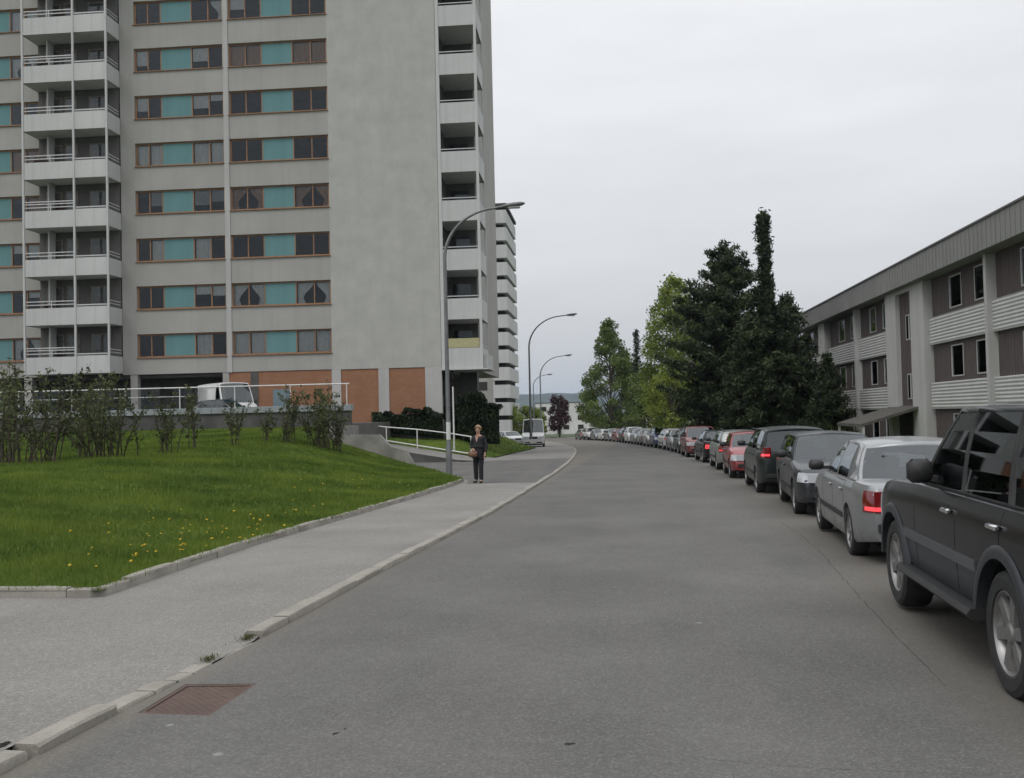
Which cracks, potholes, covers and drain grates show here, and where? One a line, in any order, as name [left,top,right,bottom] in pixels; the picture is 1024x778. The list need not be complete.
manhole cover [139,684,256,716]
crack [784,524,946,686]
